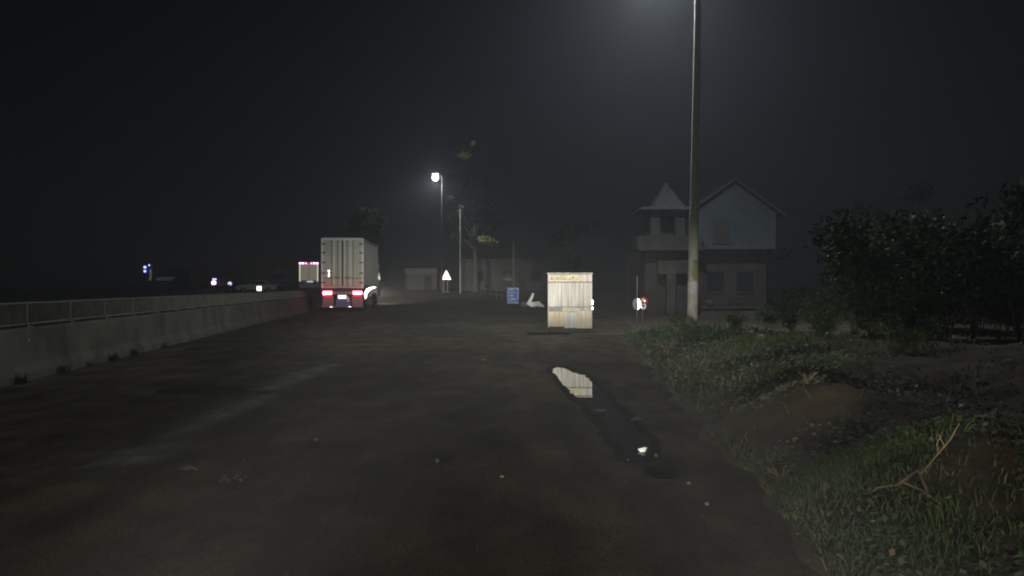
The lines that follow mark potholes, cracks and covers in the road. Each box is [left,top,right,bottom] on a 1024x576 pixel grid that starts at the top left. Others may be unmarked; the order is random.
pothole [546,365,662,463]
